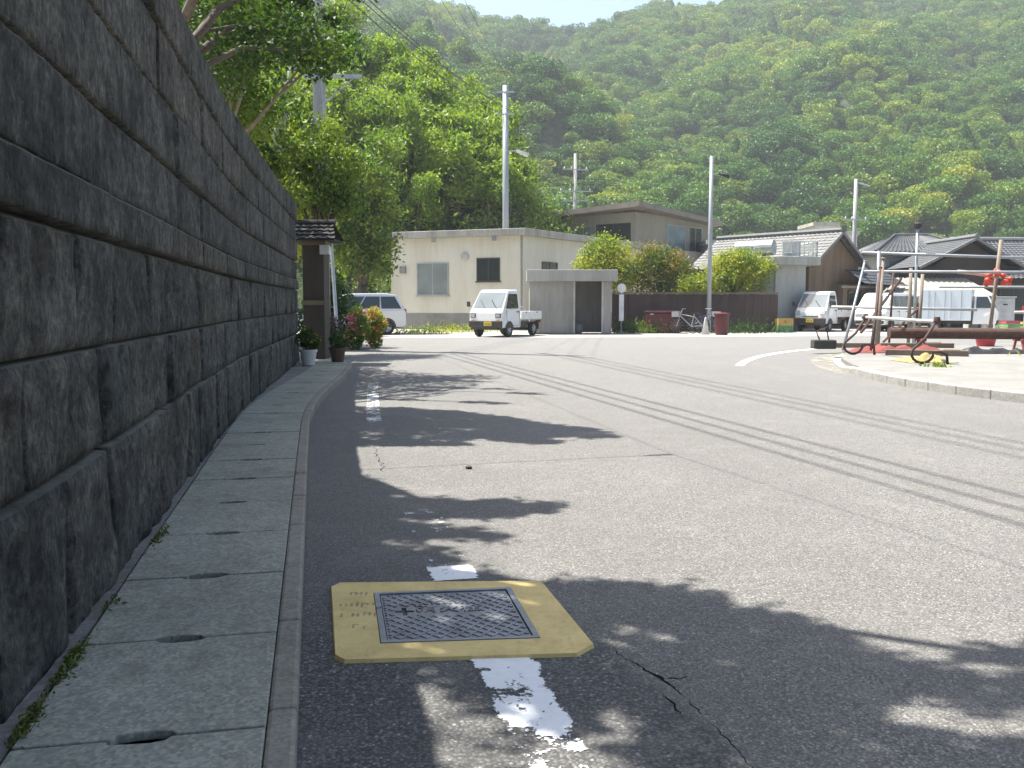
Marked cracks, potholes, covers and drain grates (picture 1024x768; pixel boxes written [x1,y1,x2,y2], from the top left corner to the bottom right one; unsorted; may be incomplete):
manhole cover [331,581,594,664]
crack [615,650,754,768]
